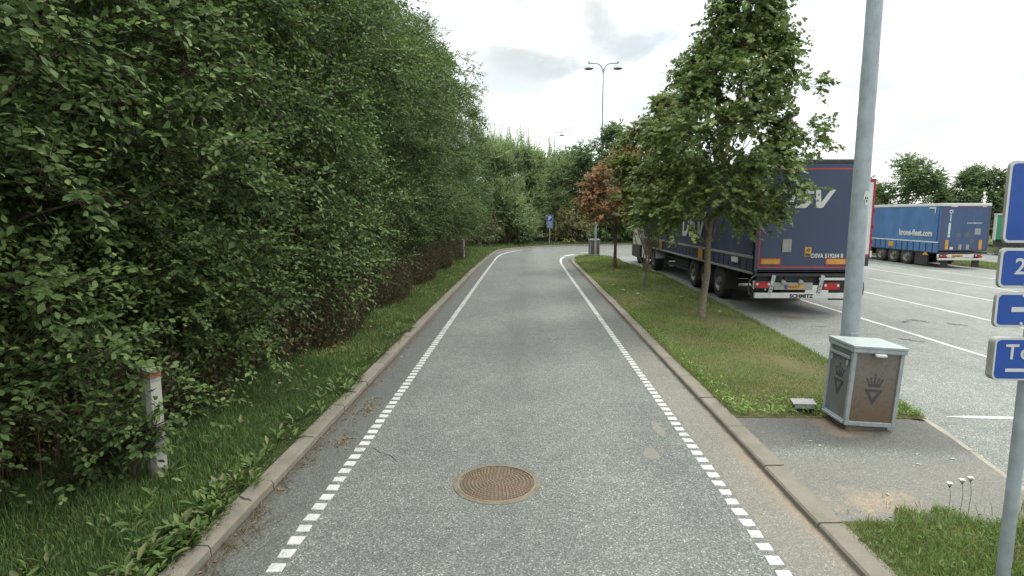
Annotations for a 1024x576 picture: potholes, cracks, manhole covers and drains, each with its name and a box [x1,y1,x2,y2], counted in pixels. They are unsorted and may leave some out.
manhole cover [453,464,540,505]
